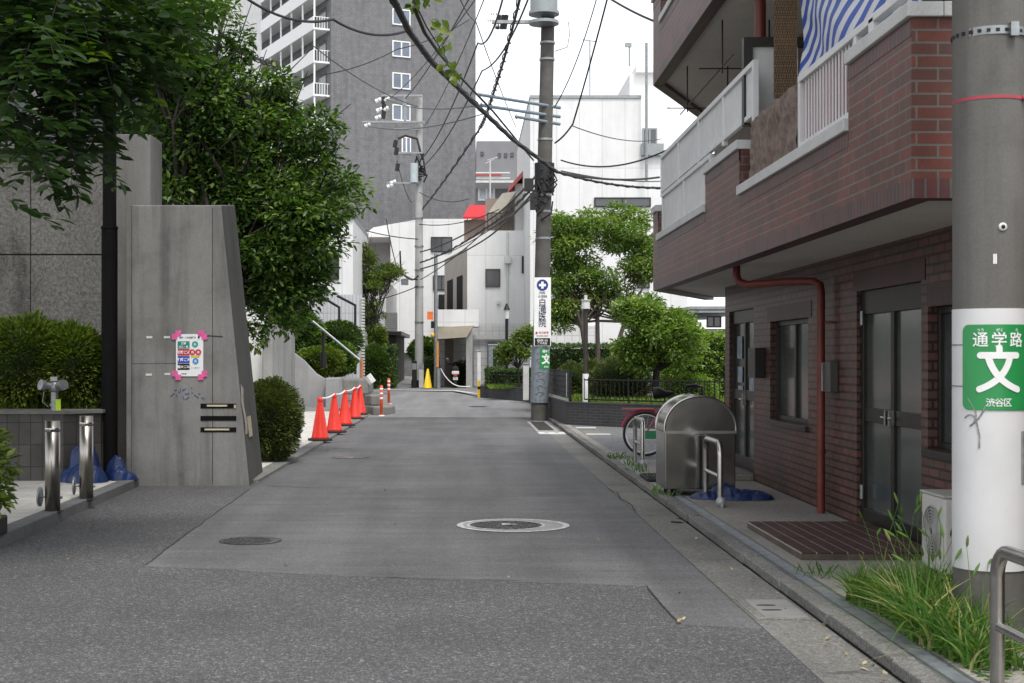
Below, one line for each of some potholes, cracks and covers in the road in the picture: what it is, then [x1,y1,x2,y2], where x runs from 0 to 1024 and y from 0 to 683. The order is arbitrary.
manhole cover [457,519,570,532]
manhole cover [219,537,281,545]
